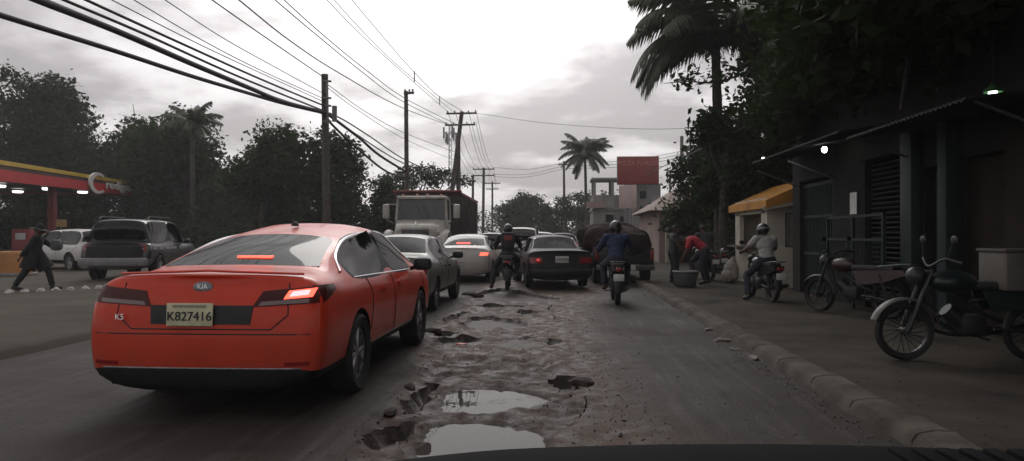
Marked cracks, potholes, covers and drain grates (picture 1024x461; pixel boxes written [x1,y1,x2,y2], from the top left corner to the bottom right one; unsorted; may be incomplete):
pothole [363,421,421,450]
pothole [435,334,484,346]
pothole [474,288,560,302]
pothole [402,418,555,459]
pothole [399,382,441,416]
pothole [439,311,469,322]
pothole [433,382,563,415]
pothole [547,375,582,392]
